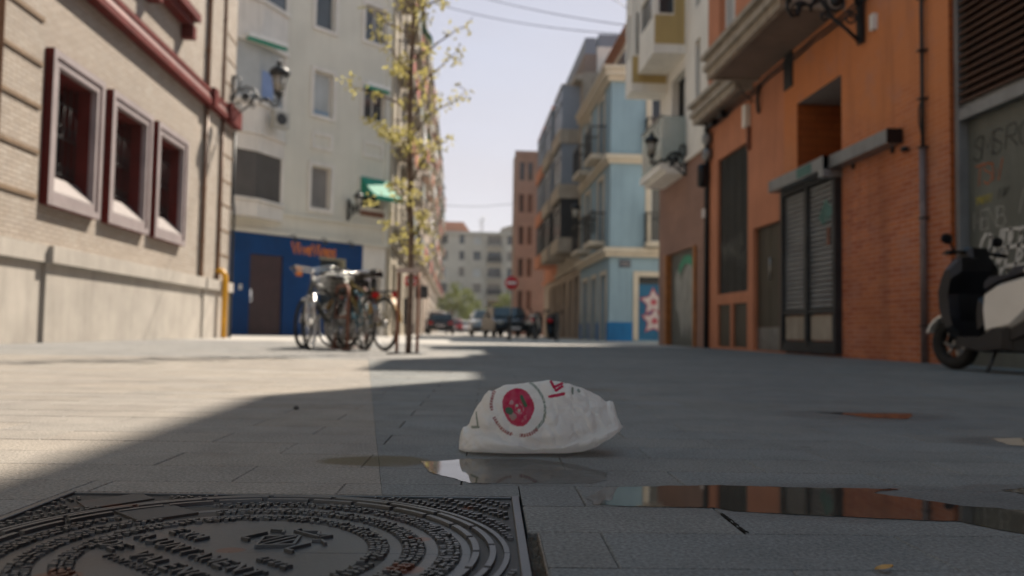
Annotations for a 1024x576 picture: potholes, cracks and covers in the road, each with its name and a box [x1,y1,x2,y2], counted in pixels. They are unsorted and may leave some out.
manhole cover [0,491,532,576]
